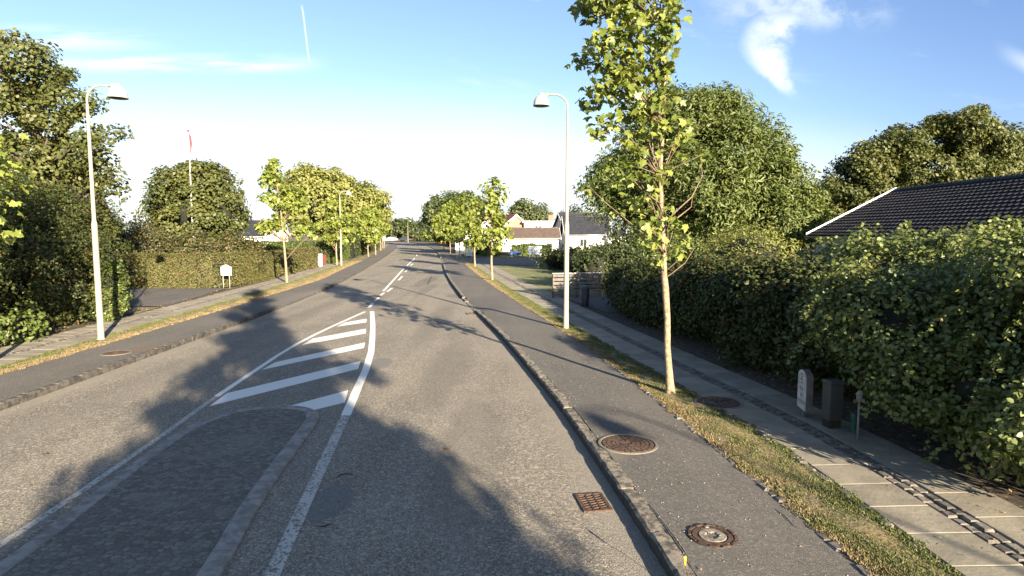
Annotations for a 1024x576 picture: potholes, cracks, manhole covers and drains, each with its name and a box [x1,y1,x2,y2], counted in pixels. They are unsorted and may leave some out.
manhole cover [598,434,658,454]
manhole cover [687,524,738,549]
drain grate [574,492,613,513]
manhole cover [694,396,744,410]
